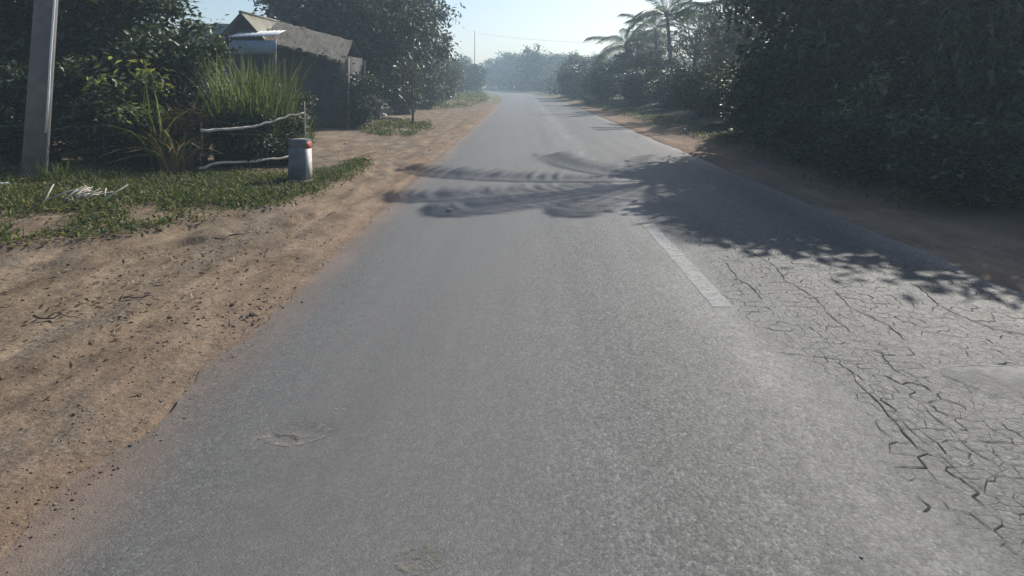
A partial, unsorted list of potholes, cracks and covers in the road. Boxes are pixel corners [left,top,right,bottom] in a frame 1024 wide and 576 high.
crack [658,220,1024,558]
pothole [257,420,333,446]
pothole [394,544,438,575]
